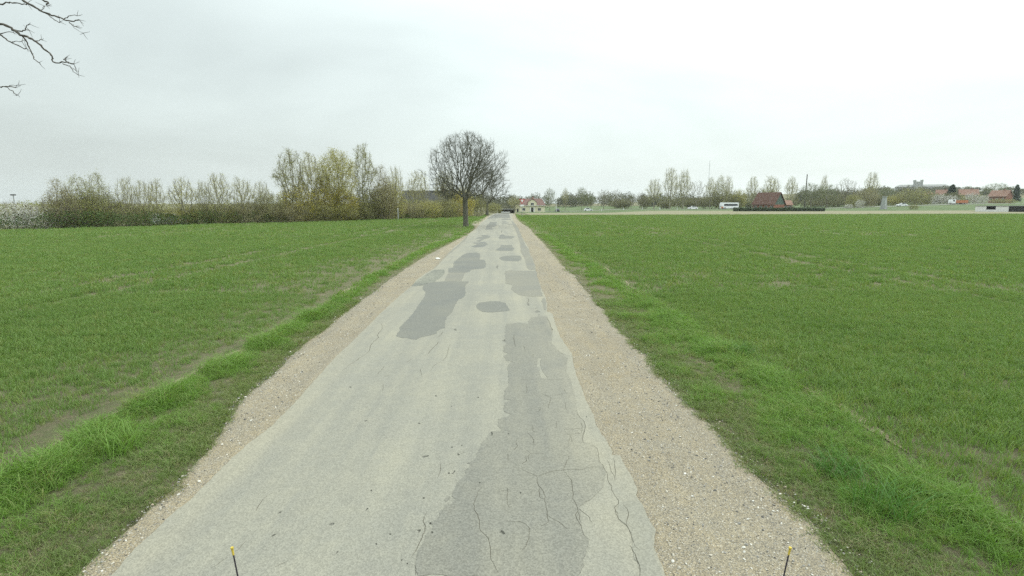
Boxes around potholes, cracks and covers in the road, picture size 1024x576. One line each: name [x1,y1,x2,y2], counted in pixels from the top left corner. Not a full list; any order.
crack [473,488,499,573]
crack [510,386,640,568]
